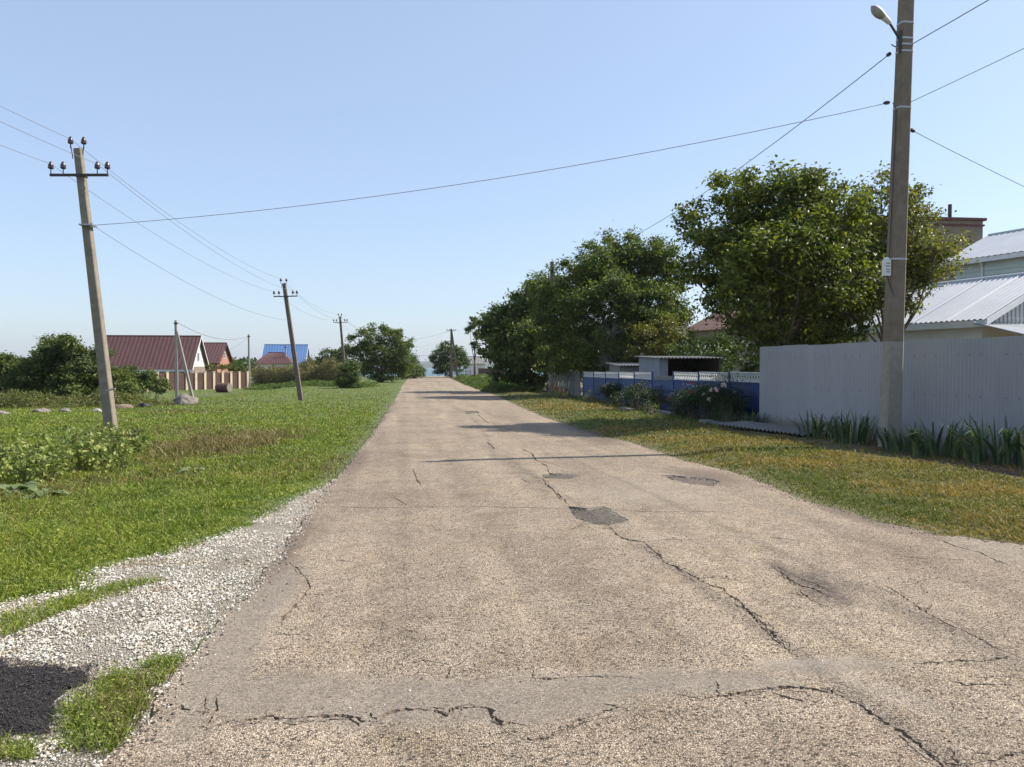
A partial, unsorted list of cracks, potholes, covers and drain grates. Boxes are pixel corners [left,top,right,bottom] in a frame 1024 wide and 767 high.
crack [161,442,1024,767]
pothole [568,506,628,525]
pothole [660,475,720,486]
